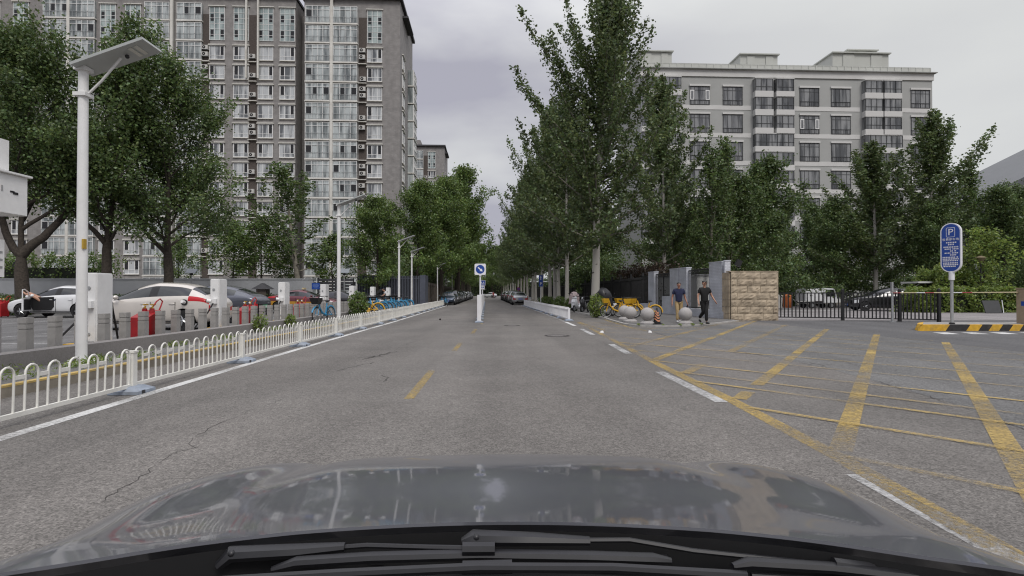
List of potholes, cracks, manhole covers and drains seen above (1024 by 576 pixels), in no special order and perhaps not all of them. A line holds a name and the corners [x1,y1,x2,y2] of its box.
crack [105,403,272,500]
crack [338,342,412,385]
